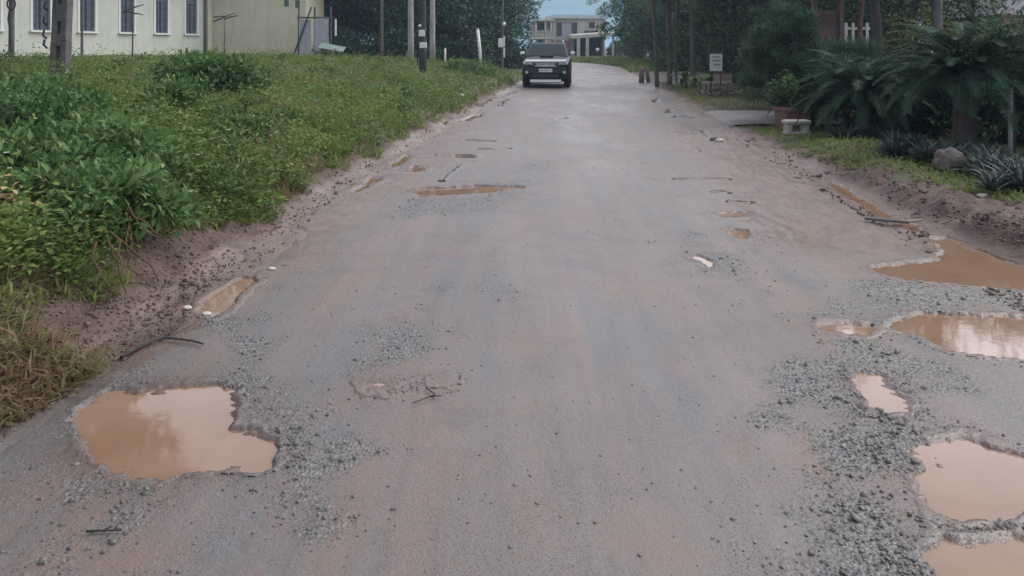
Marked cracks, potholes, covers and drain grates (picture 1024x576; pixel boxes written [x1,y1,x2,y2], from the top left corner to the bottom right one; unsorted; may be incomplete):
pothole [375,153,421,169]
pothole [821,177,939,234]
pothole [808,316,890,339]
pothole [349,374,416,399]
pothole [58,377,292,489]
pothole [396,184,538,197]
pothole [871,308,1024,363]
pothole [708,210,755,219]
pothole [842,366,920,420]
pothole [339,175,391,194]
pothole [901,523,1024,576]
